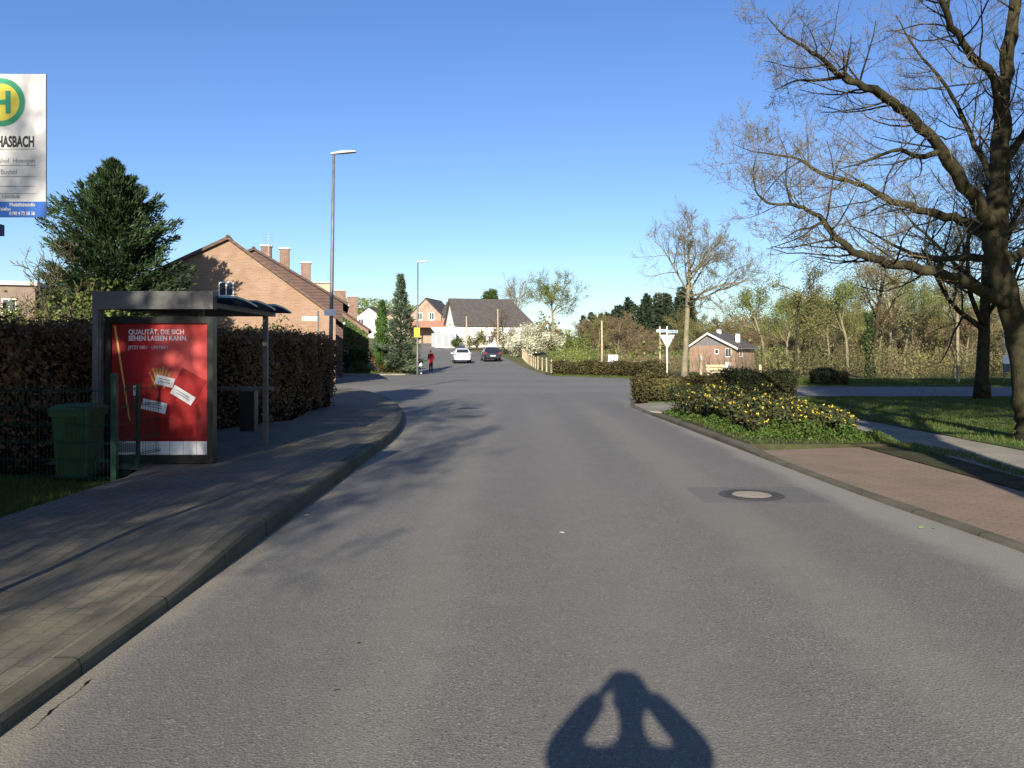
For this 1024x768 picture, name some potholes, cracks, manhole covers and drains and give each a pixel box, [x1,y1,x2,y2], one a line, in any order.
crack [32,680,90,728]
manhole cover [718,489,786,501]
